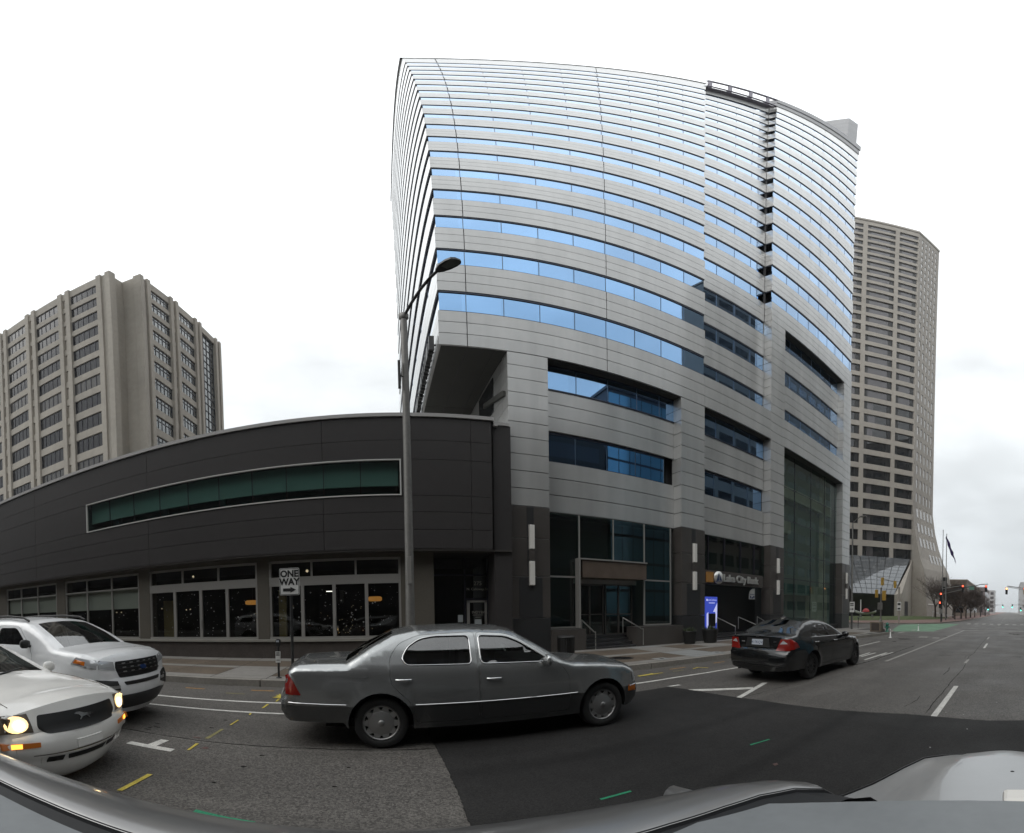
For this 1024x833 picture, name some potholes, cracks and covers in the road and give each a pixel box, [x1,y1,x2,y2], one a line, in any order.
crack [908,629,992,711]
